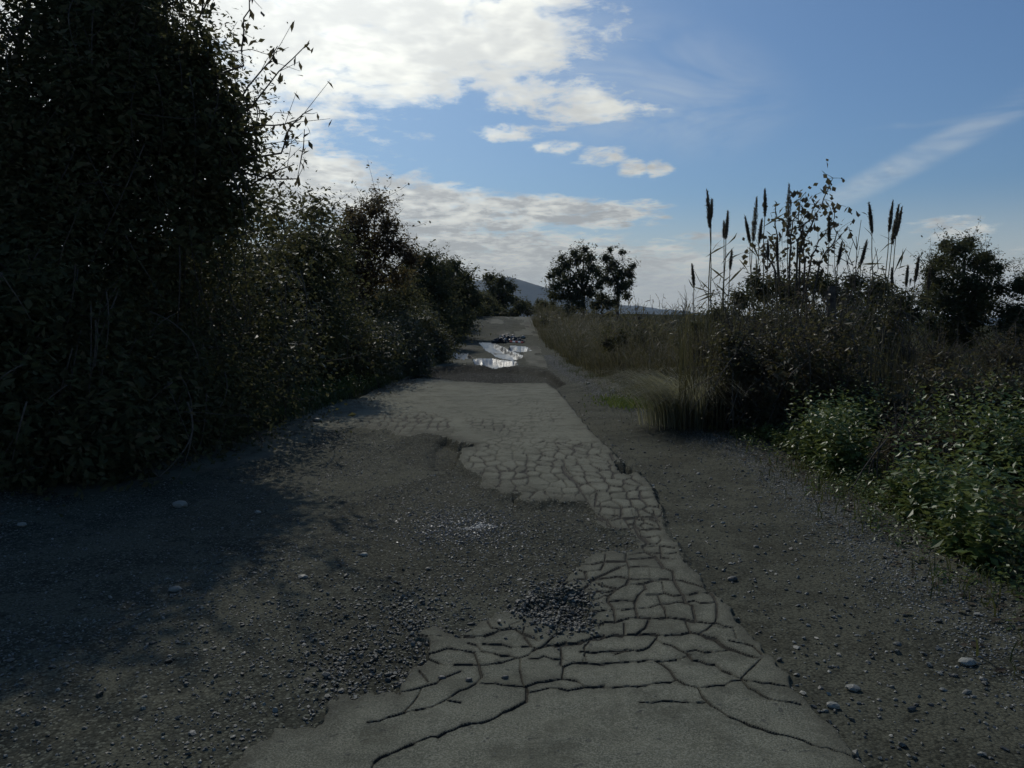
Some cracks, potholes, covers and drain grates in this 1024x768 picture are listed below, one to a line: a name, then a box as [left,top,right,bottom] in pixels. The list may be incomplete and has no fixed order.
pothole [473,358,518,369]
pothole [479,342,523,361]
crack [367,421,850,768]
crack [365,414,450,432]
pothole [523,589,592,628]
